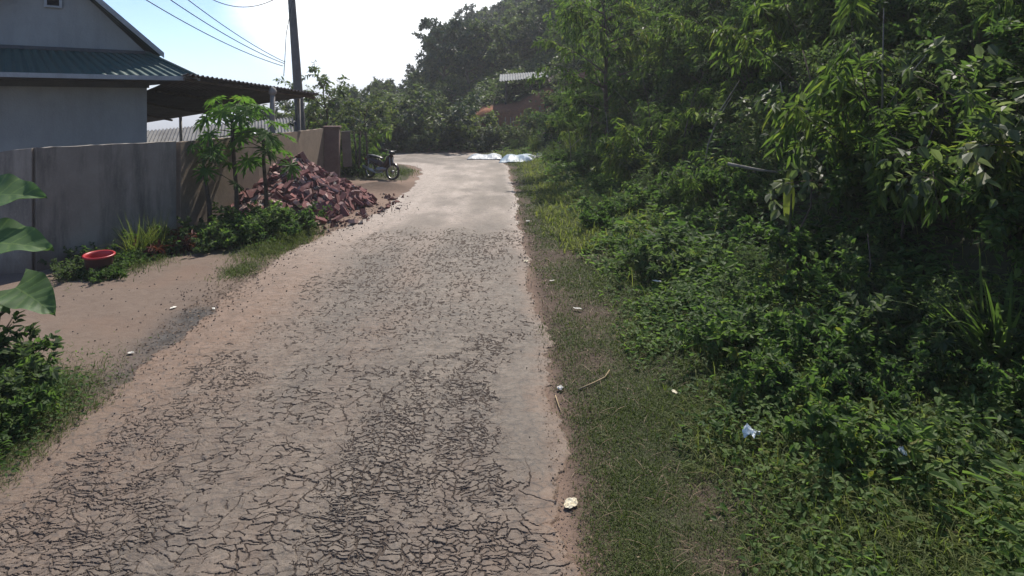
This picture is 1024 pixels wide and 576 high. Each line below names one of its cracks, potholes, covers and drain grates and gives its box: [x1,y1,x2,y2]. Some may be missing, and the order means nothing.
crack [0,330,570,576]
crack [230,226,542,361]
